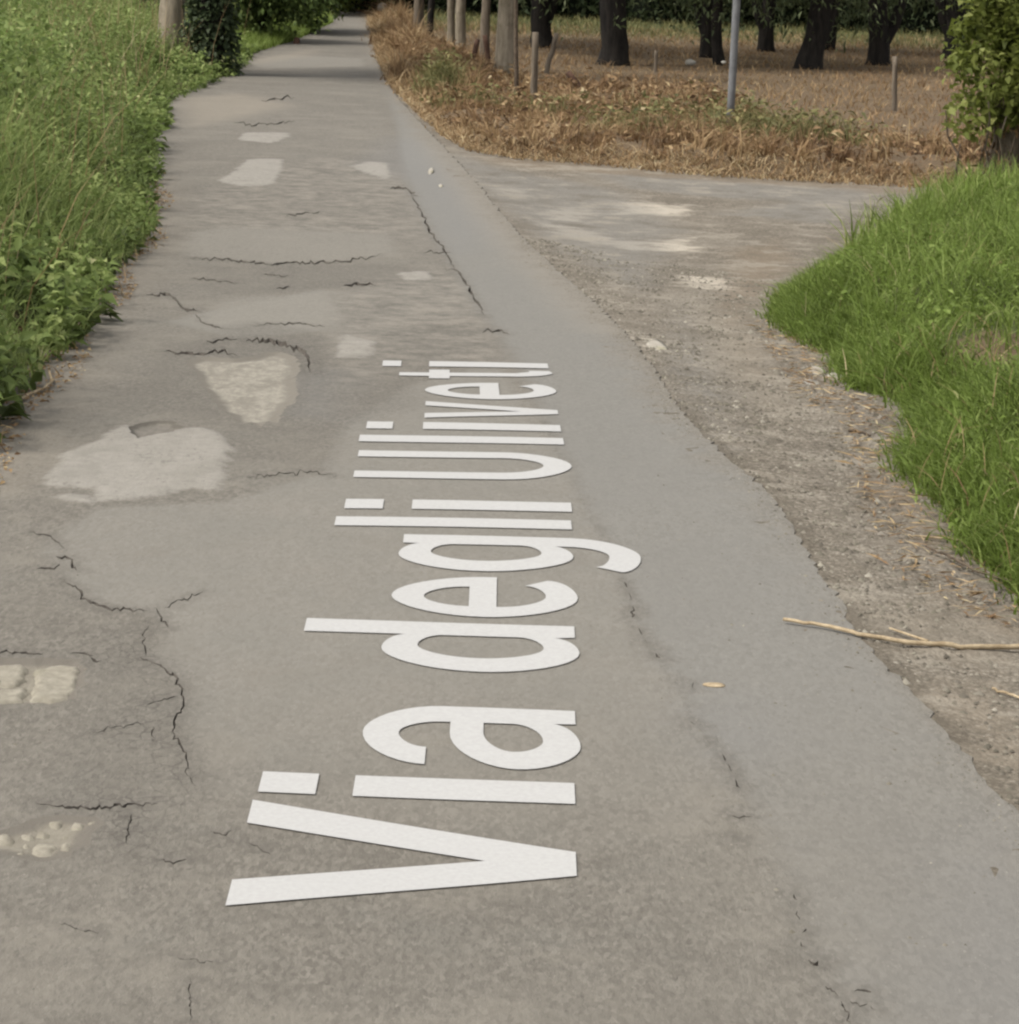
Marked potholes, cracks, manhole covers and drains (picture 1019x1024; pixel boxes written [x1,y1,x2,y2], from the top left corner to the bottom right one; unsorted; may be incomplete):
pothole [129,421,183,438]
crack [149,255,378,371]
crack [390,186,416,196]
crack [34,532,273,1021]
crack [0,650,99,663]
